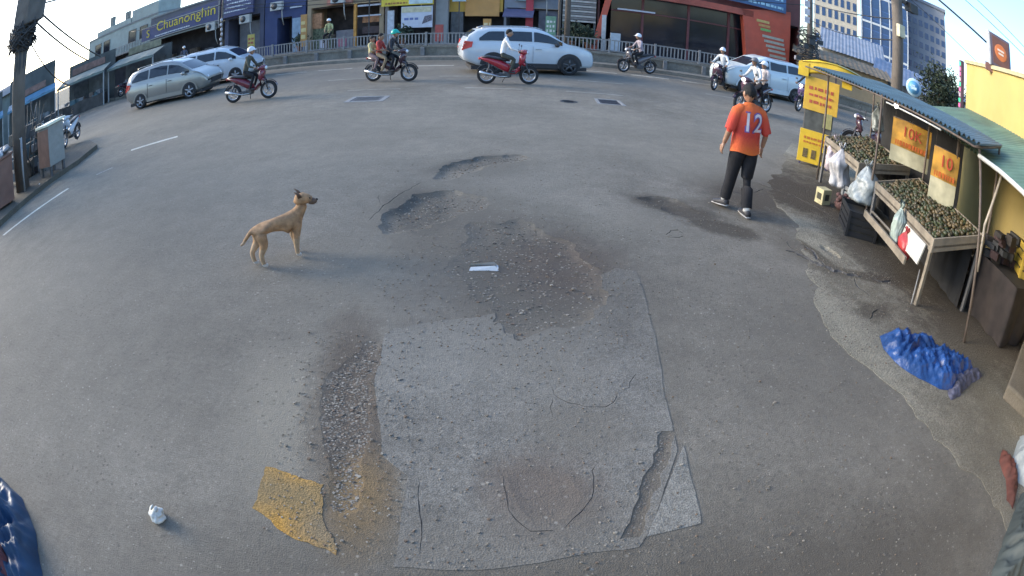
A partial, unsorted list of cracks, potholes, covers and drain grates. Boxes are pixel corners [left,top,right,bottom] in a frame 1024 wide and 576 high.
crack [549,374,636,417]
pothole [319,338,381,519]
pothole [440,218,608,342]
crack [503,464,597,531]
pothole [378,189,491,236]
pothole [432,155,531,182]
